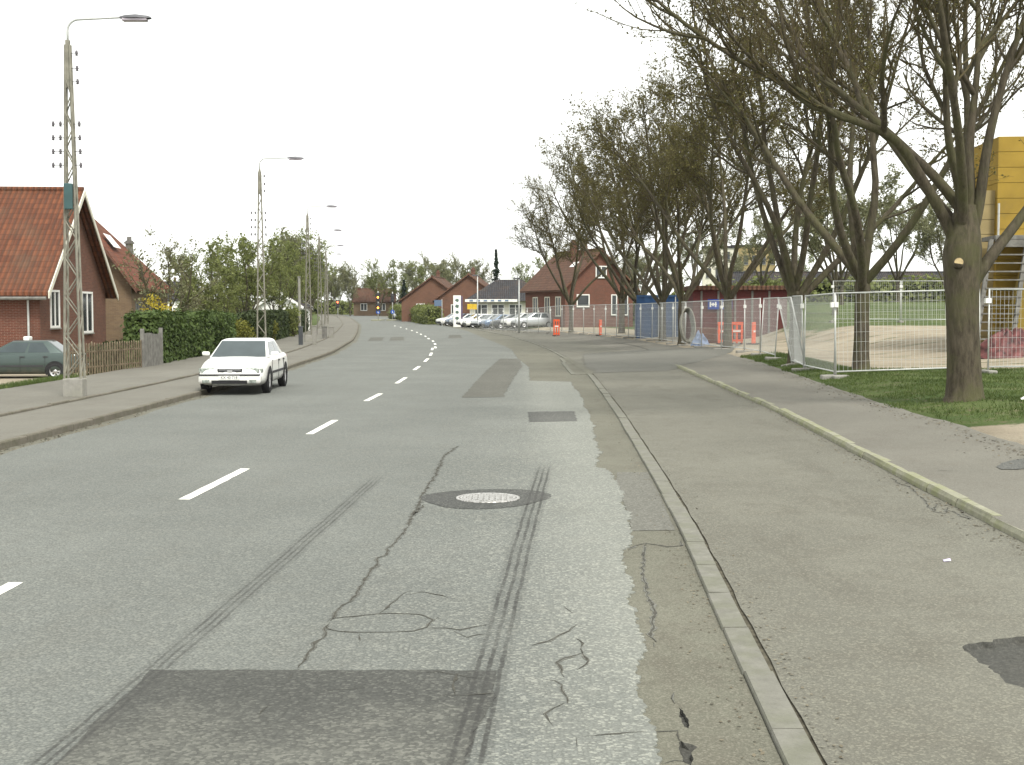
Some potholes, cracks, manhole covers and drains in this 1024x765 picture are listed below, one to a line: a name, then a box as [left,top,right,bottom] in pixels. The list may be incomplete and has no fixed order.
crack [630,541,684,647]
pothole [679,708,689,728]
crack [531,607,682,763]
manhole cover [456,493,520,503]
pothole [679,741,697,765]
crack [258,446,488,717]
crack [891,478,972,519]
